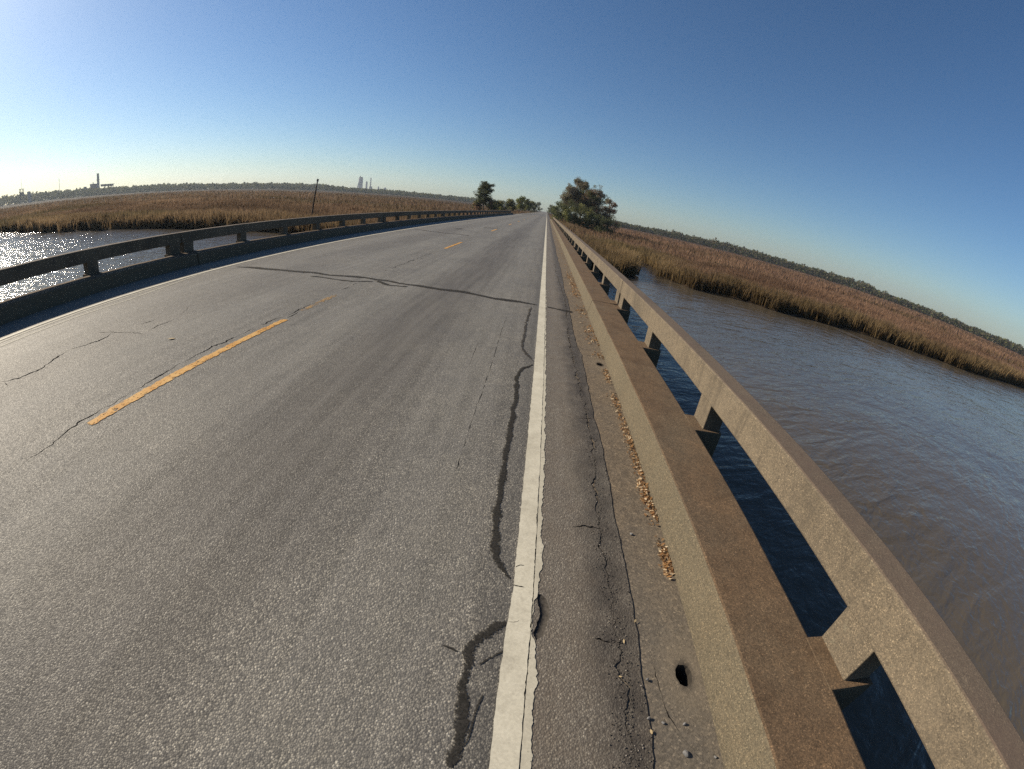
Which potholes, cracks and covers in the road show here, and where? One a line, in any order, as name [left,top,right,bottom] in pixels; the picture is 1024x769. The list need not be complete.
pothole [675,665,692,687]
crack [555,266,635,769]
crack [455,320,506,474]
pothole [533,594,550,640]
